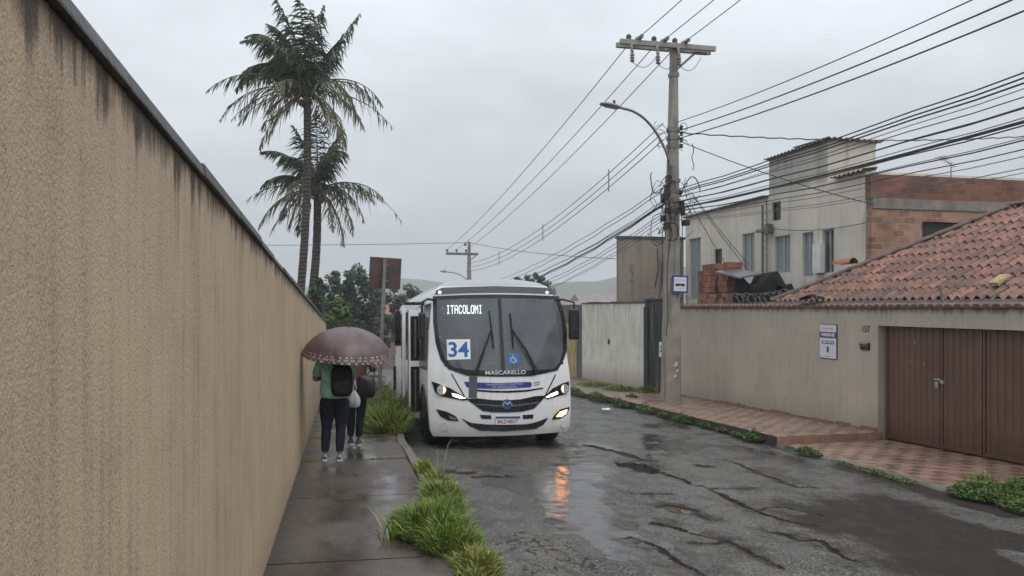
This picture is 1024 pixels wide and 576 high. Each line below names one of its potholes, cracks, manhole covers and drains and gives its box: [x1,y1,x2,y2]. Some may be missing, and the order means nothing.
pothole [655,504,701,514]
crack [582,444,861,576]
pothole [614,462,667,474]
crack [494,531,599,576]
